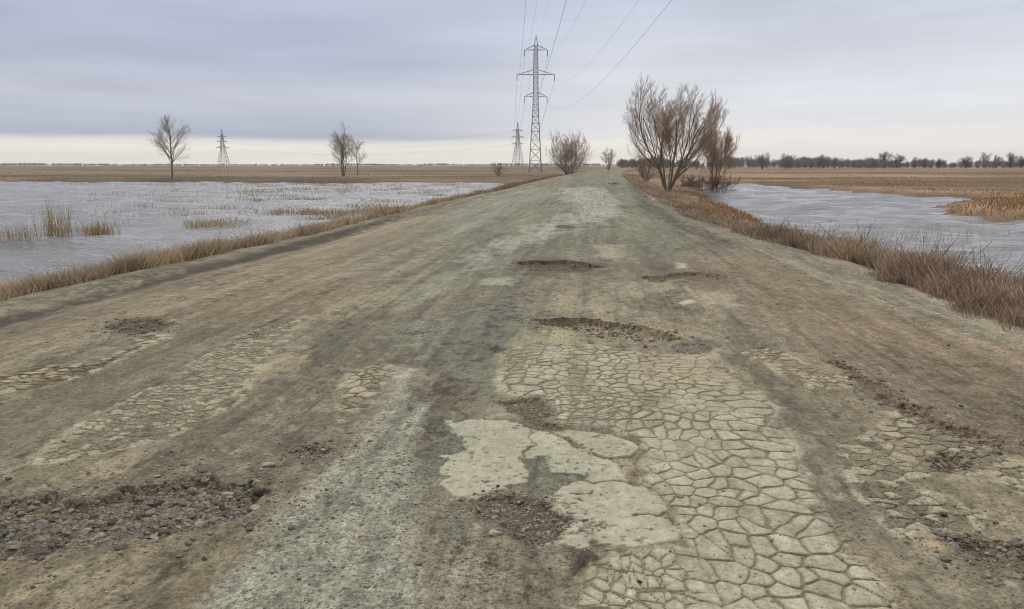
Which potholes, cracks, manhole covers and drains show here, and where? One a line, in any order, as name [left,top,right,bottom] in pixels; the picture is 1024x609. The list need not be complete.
pothole [288,445,331,460]
pothole [482,495,570,549]
pothole [105,318,175,334]
crack [341,365,391,414]
crack [0,322,297,463]
pothole [529,318,685,342]
pothole [0,471,274,562]
crack [500,342,1024,609]
pothole [640,272,728,283]
